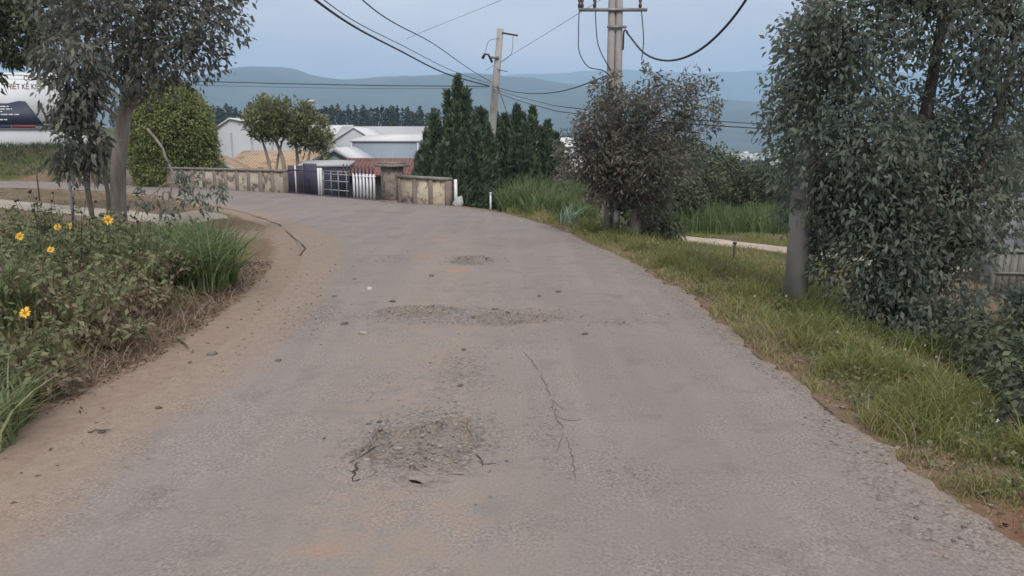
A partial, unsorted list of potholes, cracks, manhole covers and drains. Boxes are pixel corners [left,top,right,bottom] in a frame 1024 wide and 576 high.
pothole [376,465,467,491]
crack [524,352,581,480]
pothole [455,310,575,328]
pothole [336,413,499,484]
pothole [366,304,464,319]
pothole [444,254,497,266]
